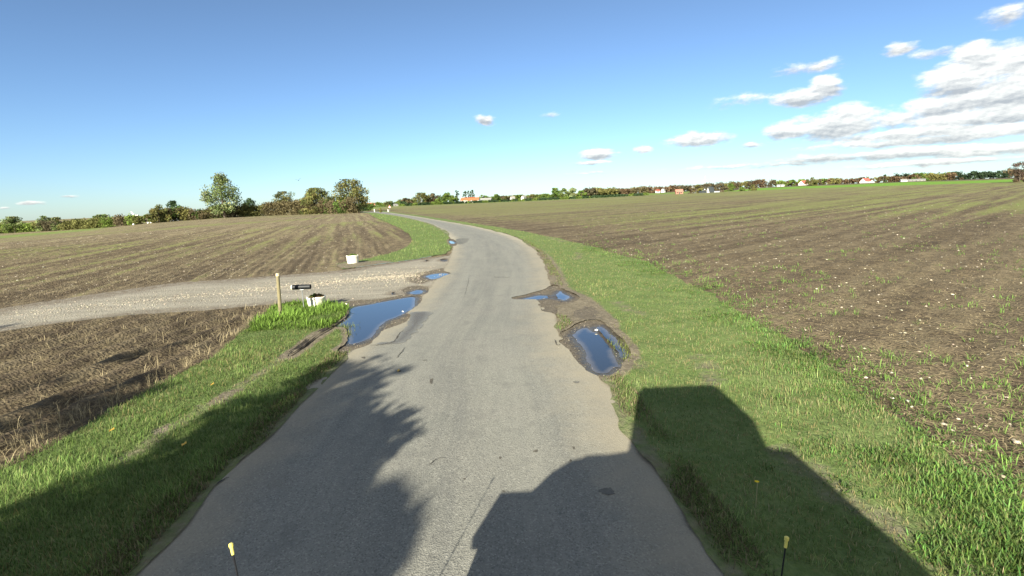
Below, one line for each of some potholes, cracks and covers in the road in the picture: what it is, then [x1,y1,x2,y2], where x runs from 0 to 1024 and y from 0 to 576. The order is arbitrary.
pothole [559,320,631,376]
pothole [403,286,429,296]
pothole [408,269,450,284]
pothole [335,295,422,353]
pothole [512,285,580,307]
